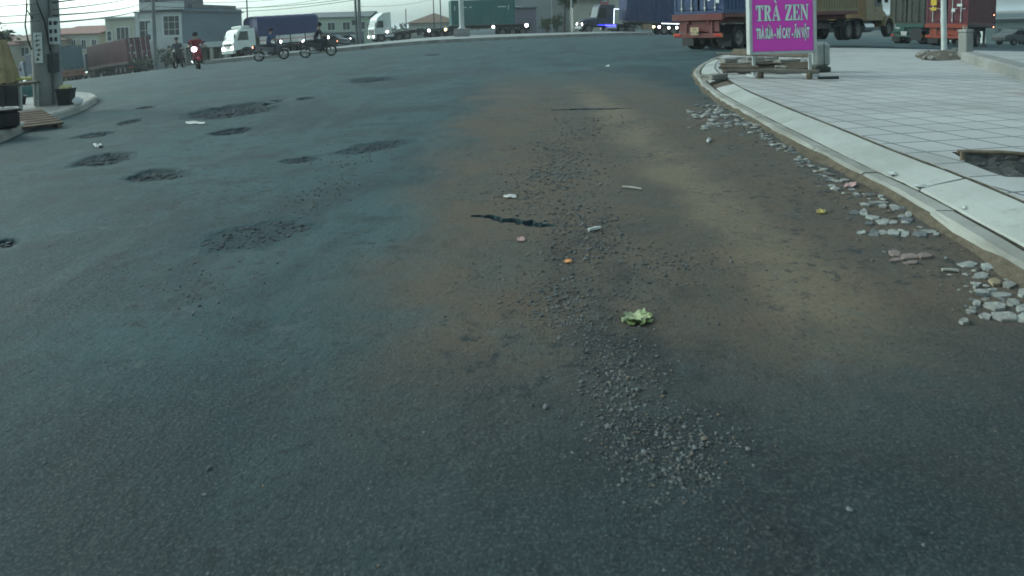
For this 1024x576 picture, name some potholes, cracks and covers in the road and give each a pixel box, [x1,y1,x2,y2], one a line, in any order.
pothole [345,76,403,84]
pothole [63,151,138,168]
pothole [178,100,290,121]
pothole [118,167,192,183]
pothole [114,118,146,126]
pothole [187,215,327,257]
pothole [67,131,118,139]
pothole [204,126,257,137]
pothole [325,139,419,156]
pothole [277,156,320,164]
crack [471,215,557,227]
pothole [0,237,20,249]
